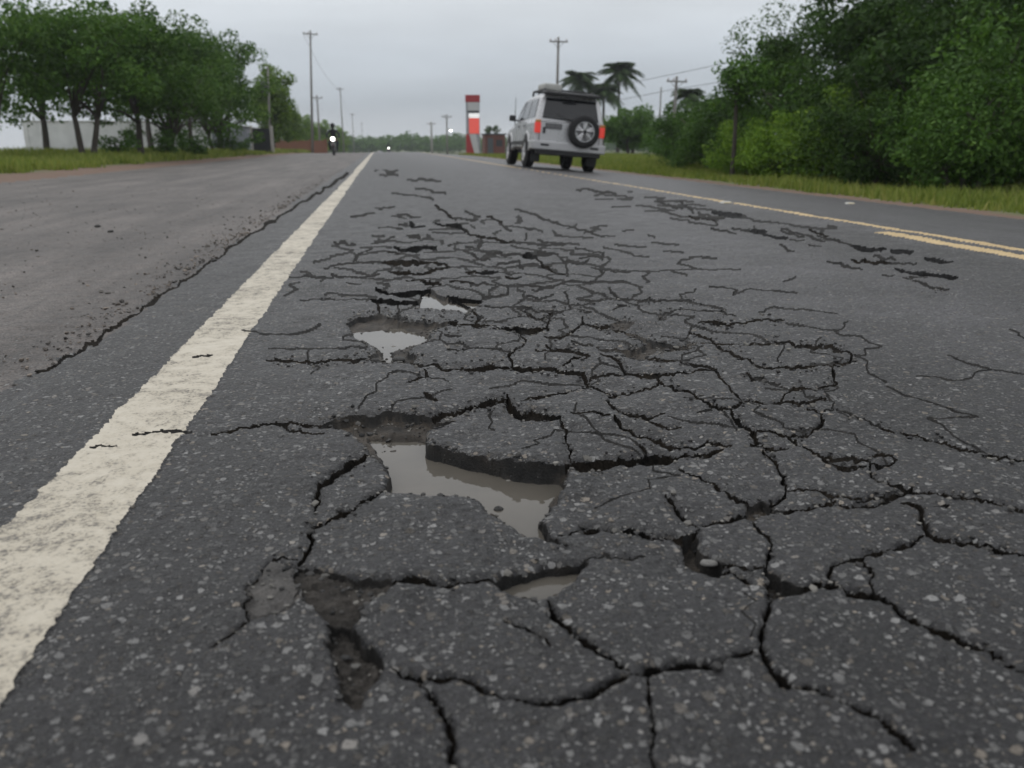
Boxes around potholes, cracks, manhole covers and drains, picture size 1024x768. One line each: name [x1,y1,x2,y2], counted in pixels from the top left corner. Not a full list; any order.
pothole [417,289,472,312]
pothole [346,314,448,364]
pothole [489,561,589,600]
crack [35,169,1024,768]
pothole [446,295,484,310]
pothole [326,624,385,710]
pothole [318,410,569,545]
